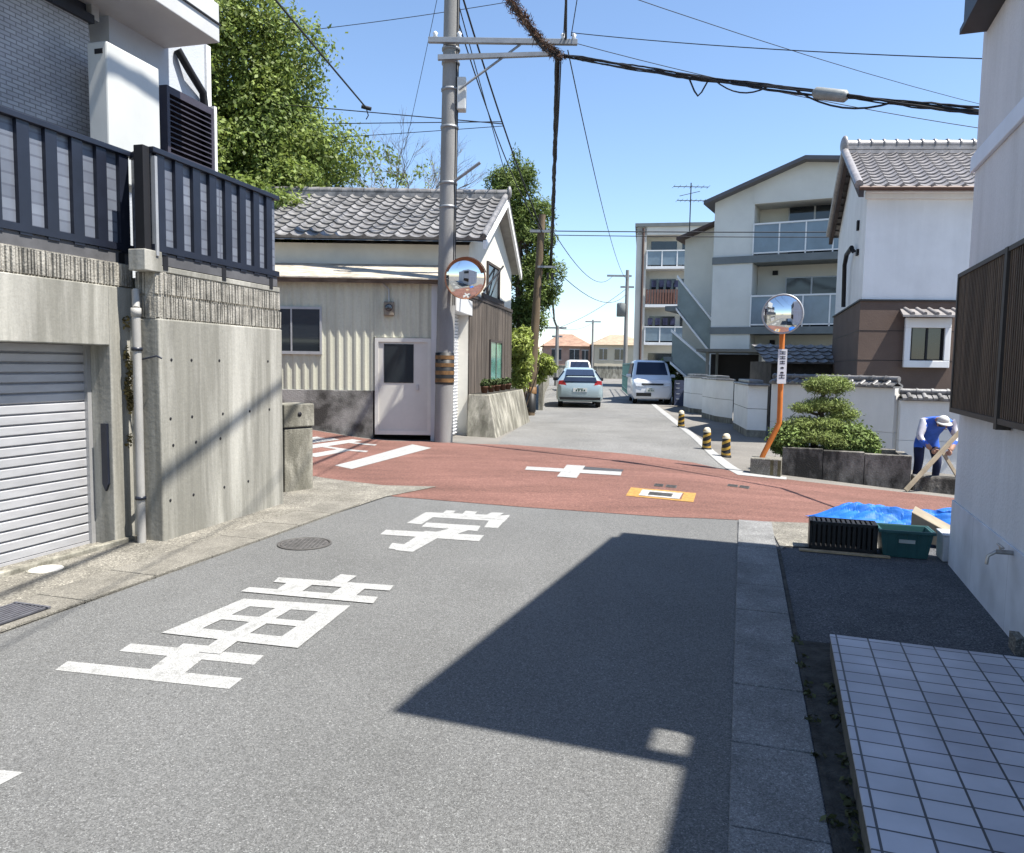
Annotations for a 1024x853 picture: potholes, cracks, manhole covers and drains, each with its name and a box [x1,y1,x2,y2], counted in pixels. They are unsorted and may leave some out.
drain grate [0,601,51,626]
manhole cover [25,564,67,574]
manhole cover [277,537,332,550]
